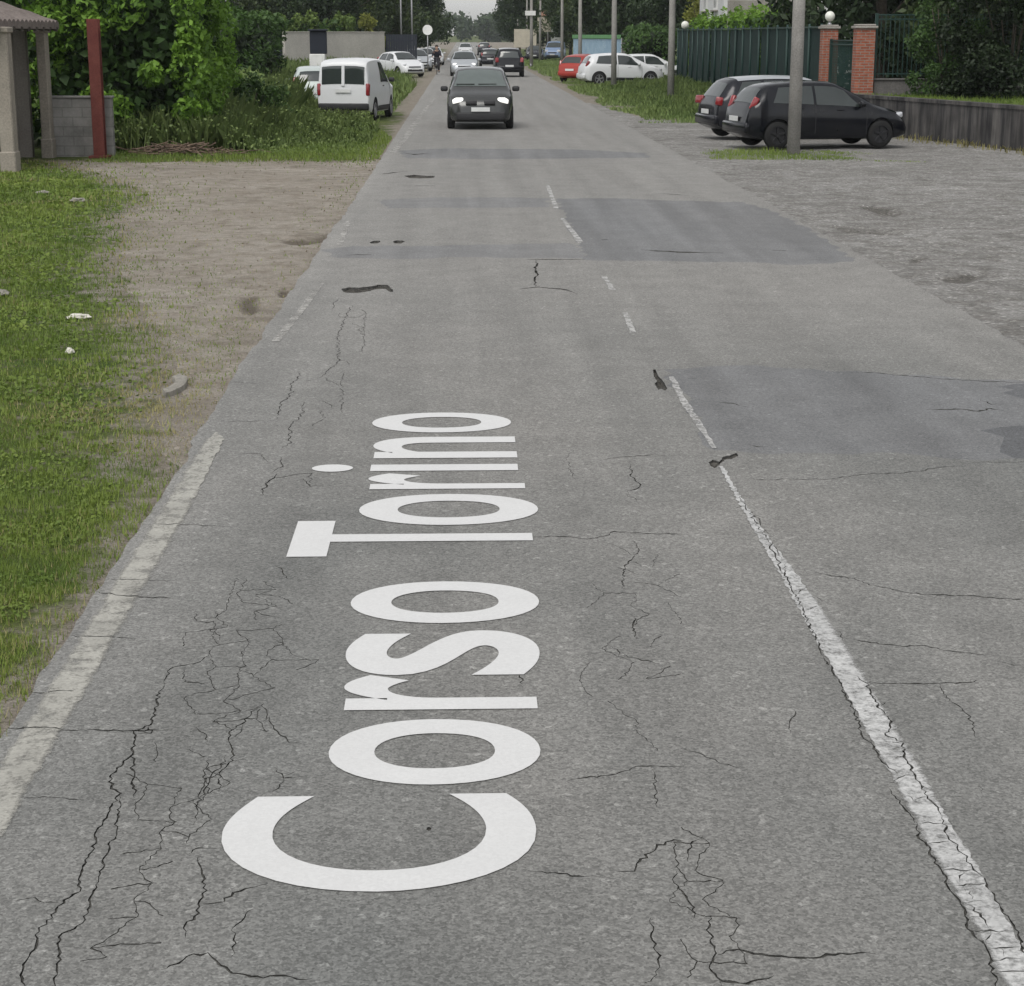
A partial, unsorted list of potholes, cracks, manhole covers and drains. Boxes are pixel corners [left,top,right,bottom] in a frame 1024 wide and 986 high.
crack [544,531,682,751]
crack [618,828,872,985]
crack [232,301,366,495]
pothole [343,285,393,293]
pothole [925,270,1007,284]
crack [10,579,319,985]
crack [928,399,1003,412]
